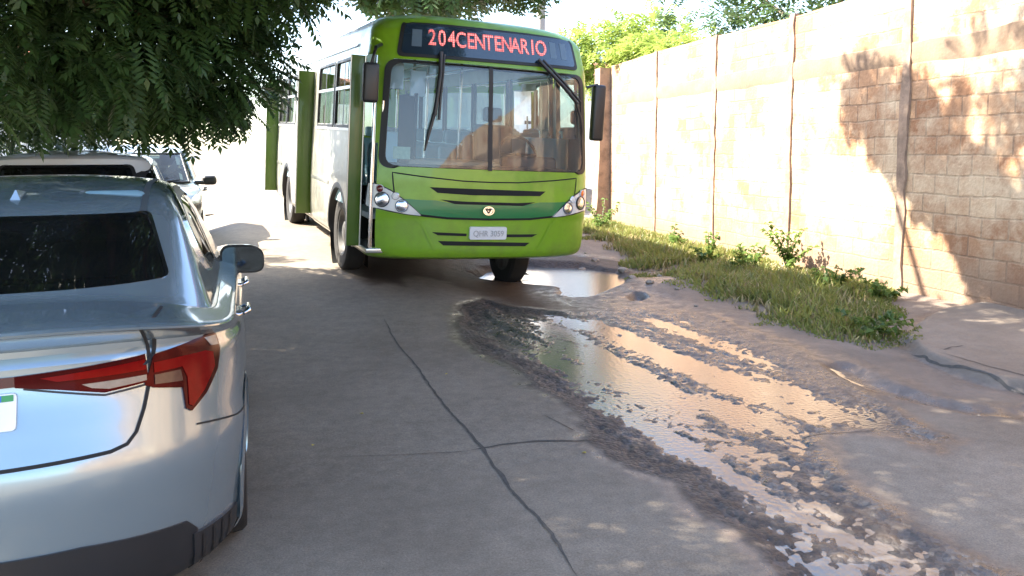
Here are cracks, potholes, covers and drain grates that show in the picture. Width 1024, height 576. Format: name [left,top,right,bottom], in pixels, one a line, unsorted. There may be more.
pothole [462,259,634,298]
pothole [454,299,1005,576]
crack [343,319,584,576]
pothole [624,291,651,301]
crack [911,345,1024,395]
